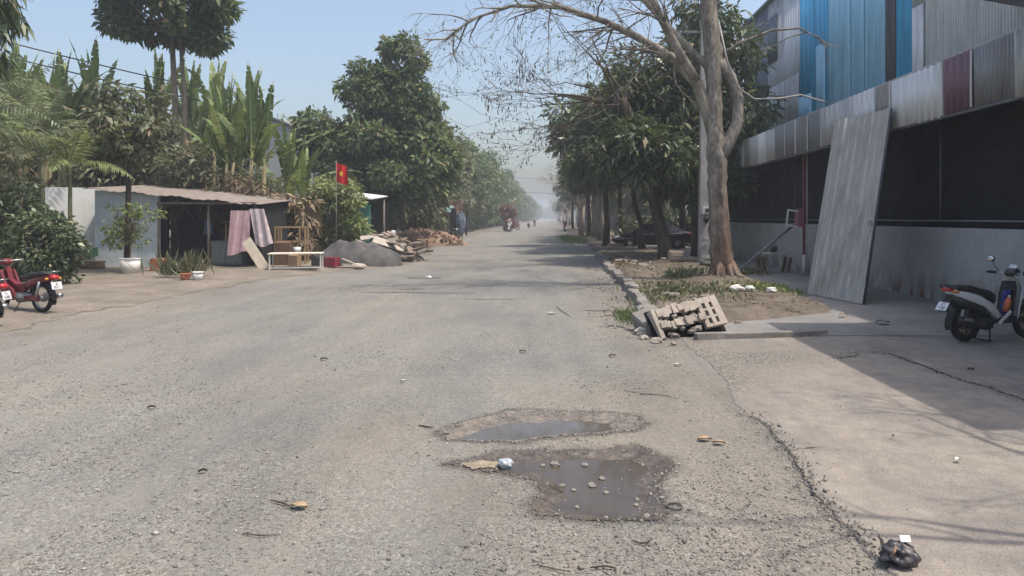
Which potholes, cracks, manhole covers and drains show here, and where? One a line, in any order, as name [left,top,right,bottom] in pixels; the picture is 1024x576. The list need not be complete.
pothole [437,409,647,442]
crack [821,349,1024,400]
crack [729,407,893,572]
pothole [443,445,676,521]
